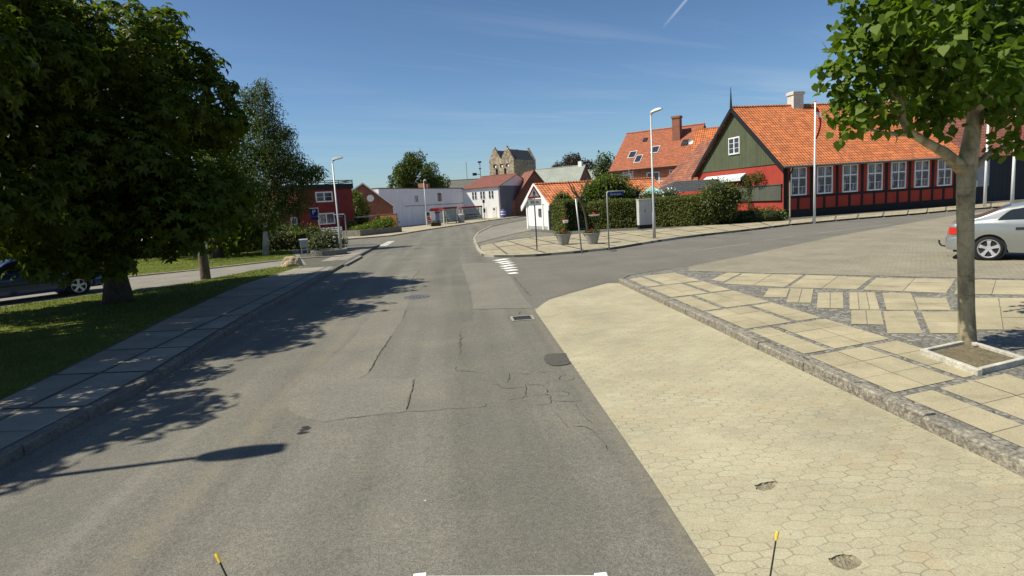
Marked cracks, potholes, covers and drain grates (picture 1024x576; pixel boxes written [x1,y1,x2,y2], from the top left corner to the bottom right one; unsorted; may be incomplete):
crack [357,370,607,449]
pothole [829,554,863,571]
pothole [755,481,778,491]
